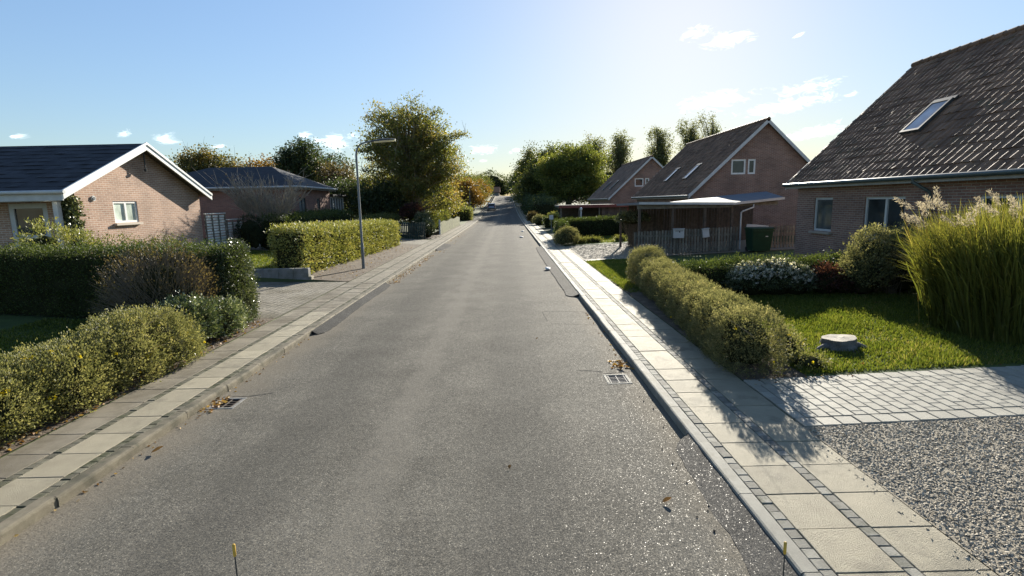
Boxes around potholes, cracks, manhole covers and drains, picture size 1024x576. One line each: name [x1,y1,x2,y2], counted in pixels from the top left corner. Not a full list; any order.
drain grate [603,374,633,384]
drain grate [206,397,247,409]
